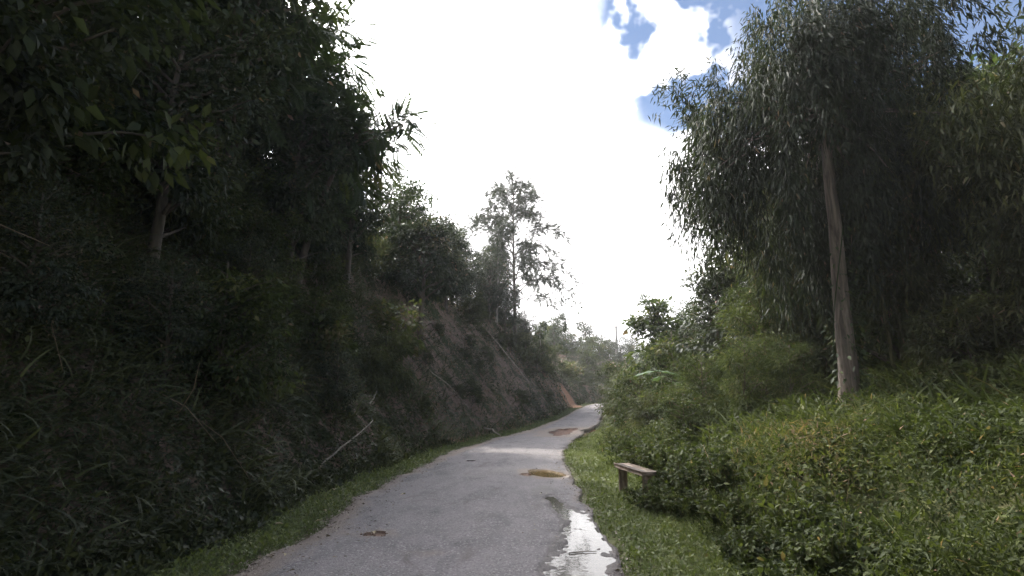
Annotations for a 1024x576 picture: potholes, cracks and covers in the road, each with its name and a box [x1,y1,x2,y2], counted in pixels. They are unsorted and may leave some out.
pothole [528,469,565,478]
pothole [549,428,578,436]
